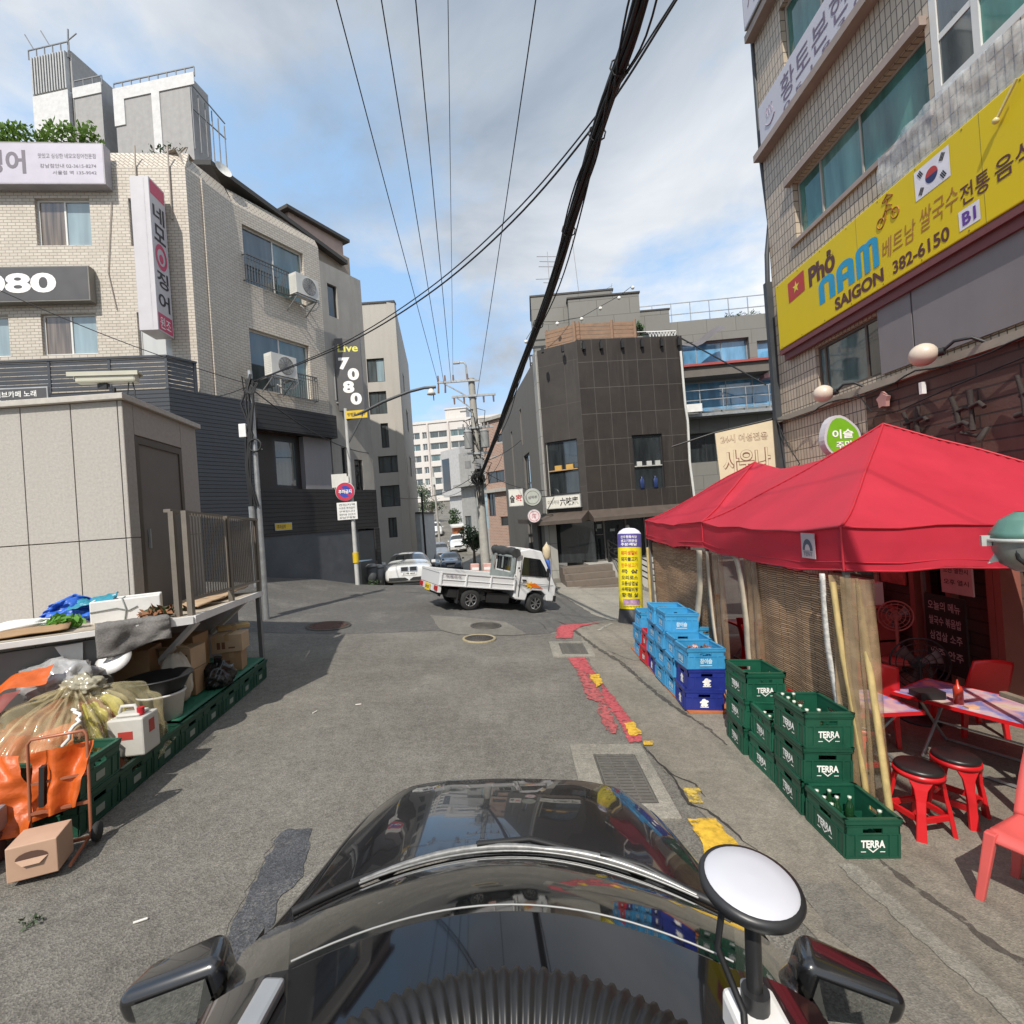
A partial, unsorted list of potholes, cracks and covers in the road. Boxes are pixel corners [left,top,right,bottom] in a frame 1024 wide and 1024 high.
drain grate [569,744,682,821]
manhole cover [462,634,496,643]
crack [643,746,757,850]
drain grate [549,641,596,658]
manhole cover [305,621,351,631]
